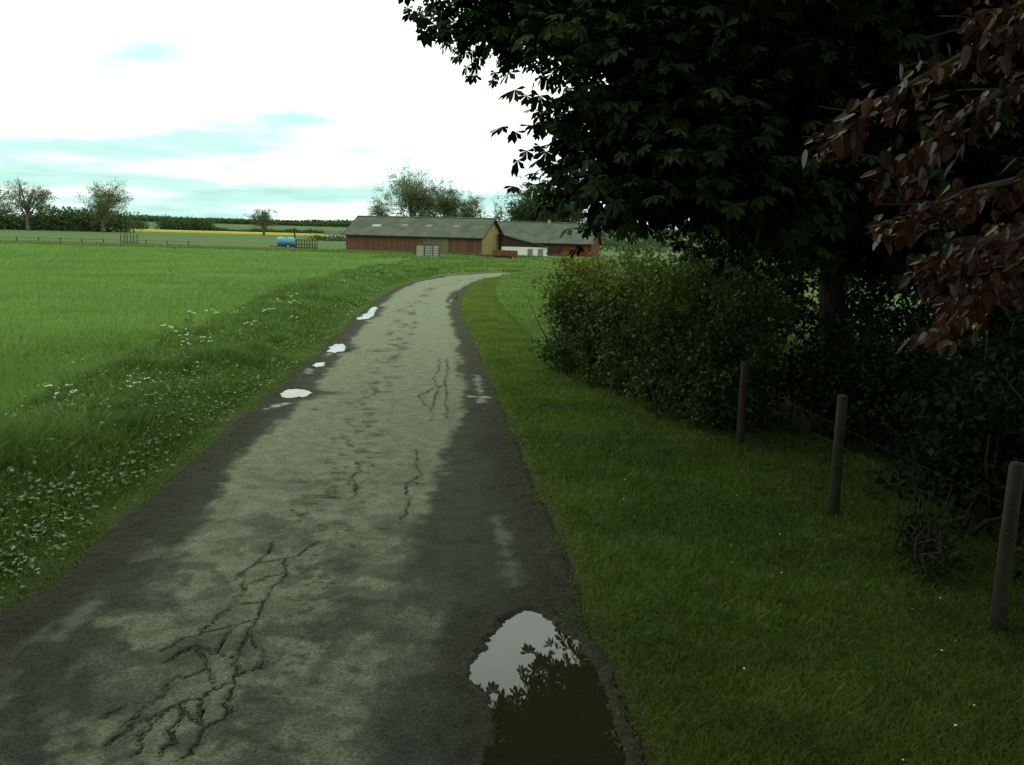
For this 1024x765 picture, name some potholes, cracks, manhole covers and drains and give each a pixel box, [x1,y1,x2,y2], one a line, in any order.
crack [399,449,425,521]
pothole [454,601,645,765]
crack [343,349,464,422]
crack [289,461,372,523]
crack [91,541,322,762]
